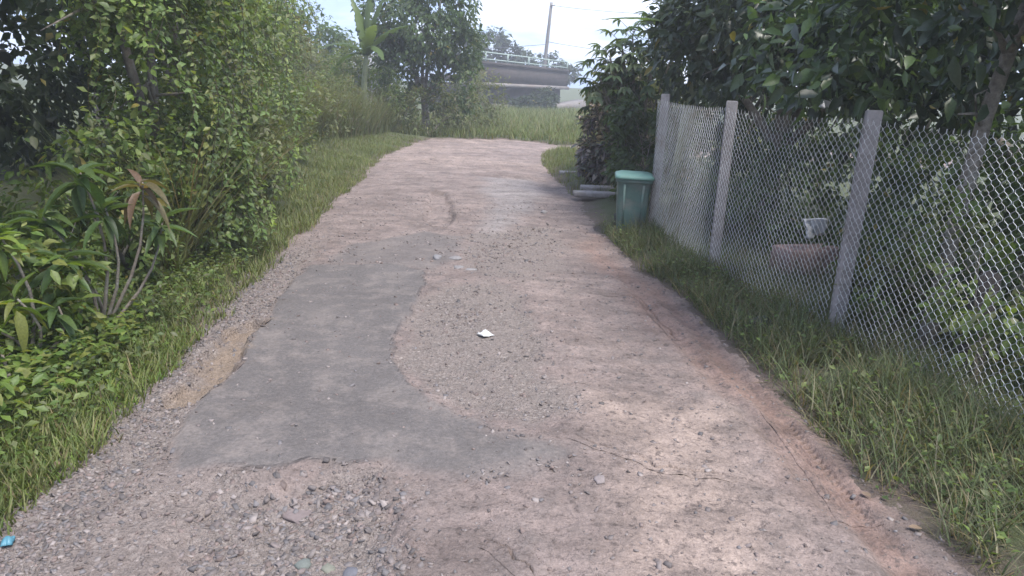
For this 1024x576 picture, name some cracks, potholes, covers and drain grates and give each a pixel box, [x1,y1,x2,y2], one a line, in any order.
pothole [154,318,272,411]
crack [587,289,685,341]
crack [478,531,550,576]
crack [568,431,737,482]
